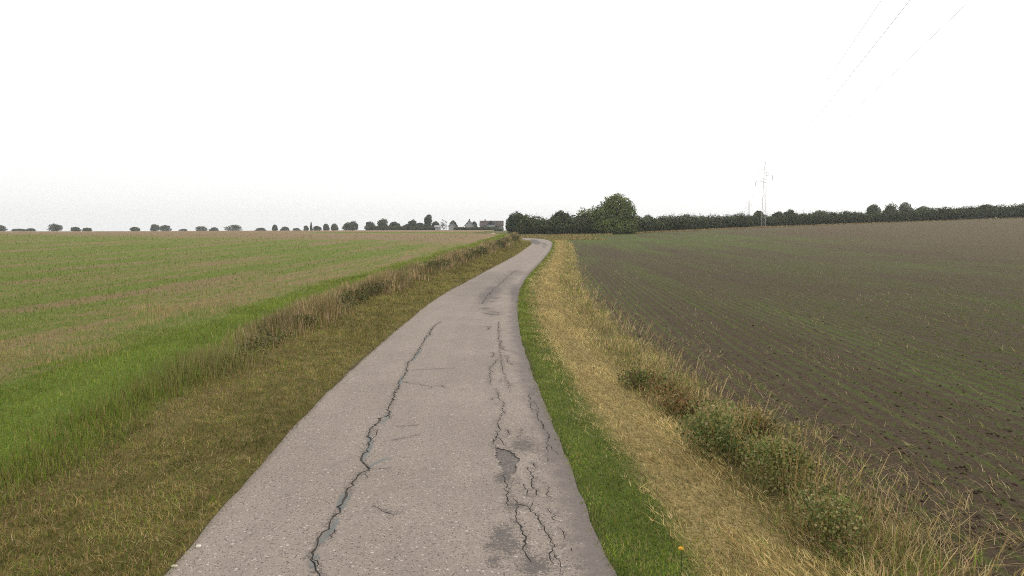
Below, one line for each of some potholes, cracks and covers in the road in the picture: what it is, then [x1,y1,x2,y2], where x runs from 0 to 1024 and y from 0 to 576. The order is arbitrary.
pothole [495,447,520,475]
crack [310,324,444,576]
crack [489,323,572,570]
